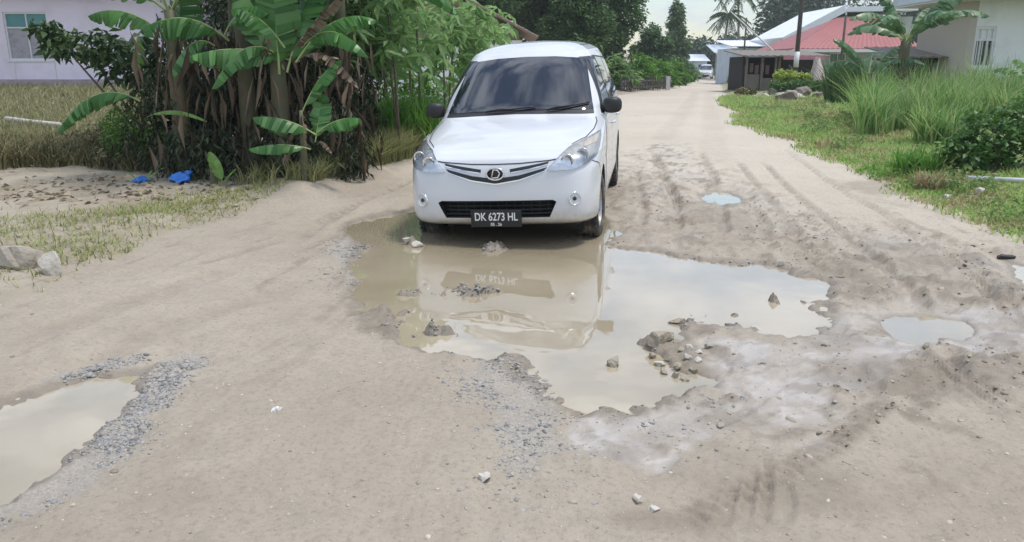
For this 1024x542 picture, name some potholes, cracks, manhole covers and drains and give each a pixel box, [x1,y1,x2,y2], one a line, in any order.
pothole [335,205,852,425]
pothole [0,362,158,509]
pothole [871,312,984,346]
pothole [695,188,751,203]
